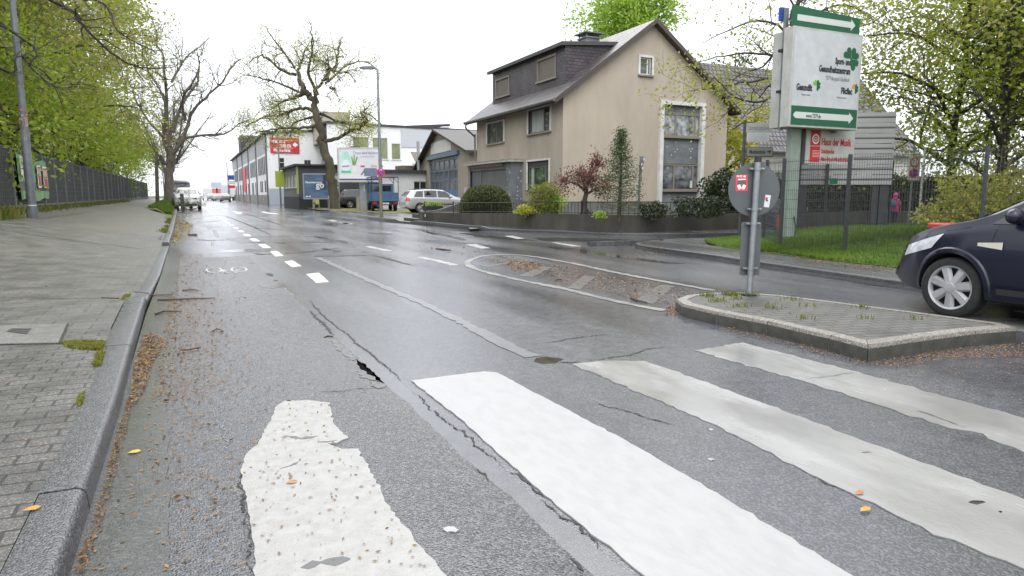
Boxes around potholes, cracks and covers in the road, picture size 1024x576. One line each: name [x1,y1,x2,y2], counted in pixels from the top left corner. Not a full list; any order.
crack [510,472,598,571]
crack [309,300,400,392]
pothole [534,356,564,364]
